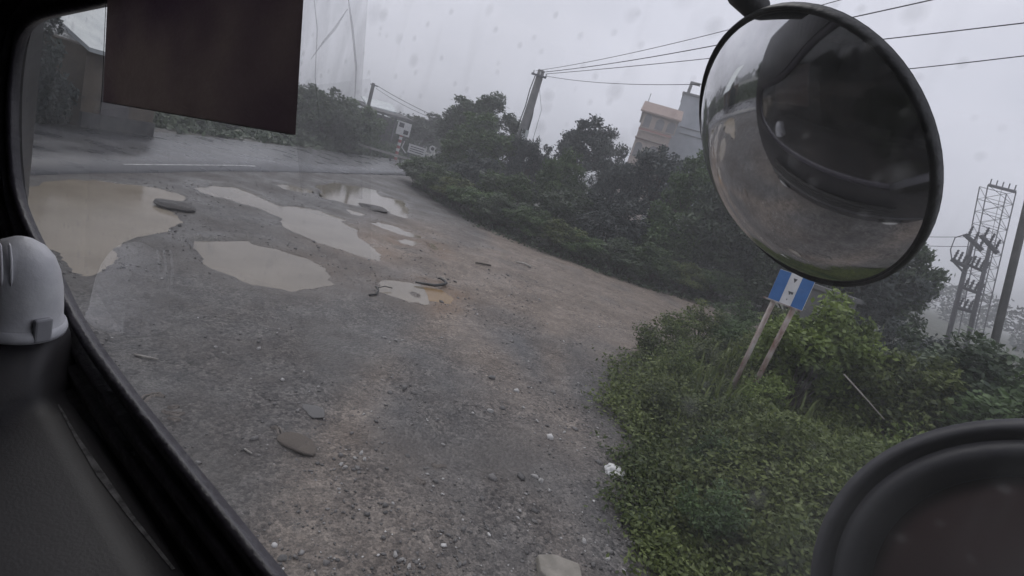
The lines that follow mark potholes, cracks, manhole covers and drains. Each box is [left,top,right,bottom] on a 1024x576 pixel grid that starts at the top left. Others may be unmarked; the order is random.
pothole [28,179,190,277]
pothole [192,183,387,261]
pothole [391,235,422,247]
pothole [376,278,429,305]
pothole [184,235,340,292]
pothole [313,181,411,218]
pothole [366,219,422,239]
pothole [415,280,454,304]
